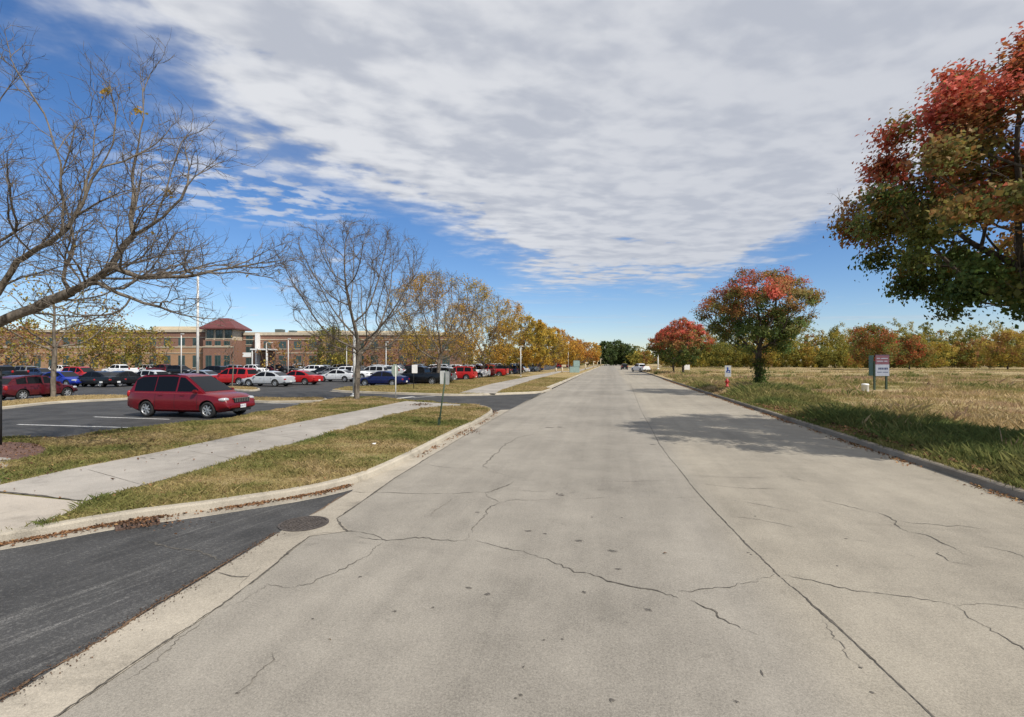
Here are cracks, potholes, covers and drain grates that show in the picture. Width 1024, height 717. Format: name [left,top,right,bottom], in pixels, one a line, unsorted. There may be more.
manhole cover [278,516,329,532]
crack [824,500,1023,566]
crack [0,436,774,699]
